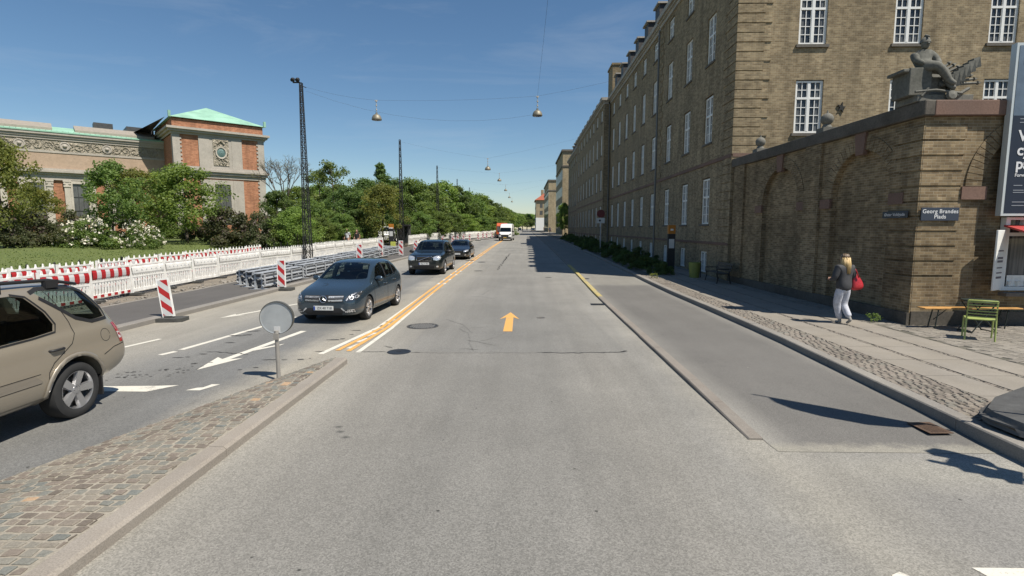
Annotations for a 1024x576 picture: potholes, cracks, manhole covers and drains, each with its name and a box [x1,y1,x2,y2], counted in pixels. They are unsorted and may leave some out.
crack [423,319,537,353]
